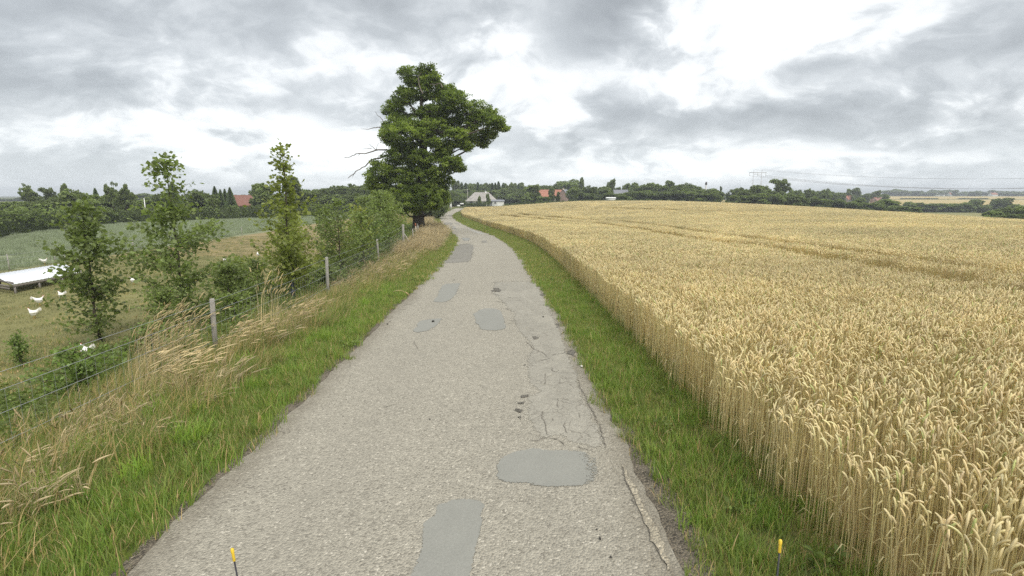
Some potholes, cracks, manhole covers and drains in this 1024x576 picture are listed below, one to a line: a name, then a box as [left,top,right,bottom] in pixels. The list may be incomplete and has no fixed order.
crack [527,342,606,450]
